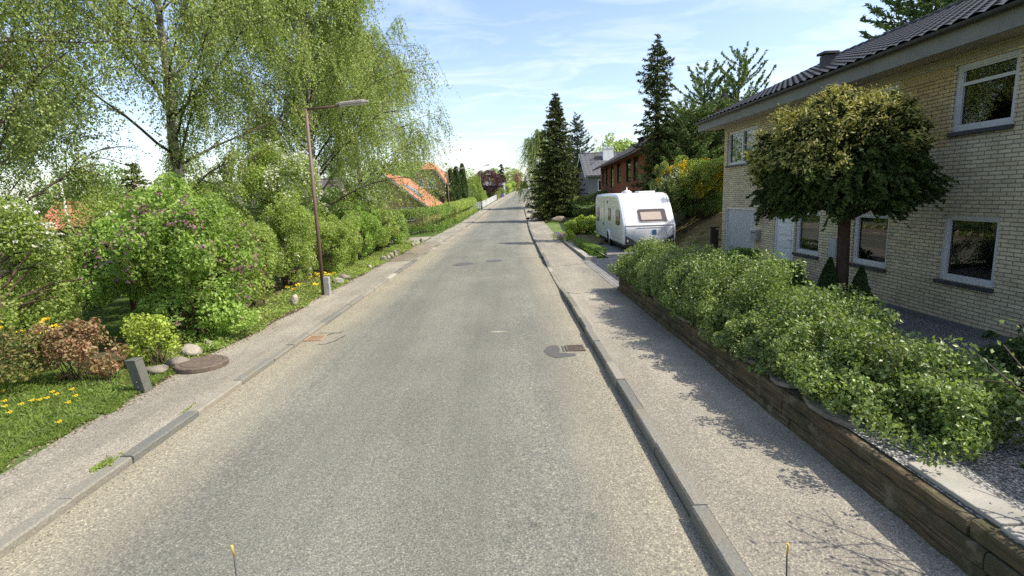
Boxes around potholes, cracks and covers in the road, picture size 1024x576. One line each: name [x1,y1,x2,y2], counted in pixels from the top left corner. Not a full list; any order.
manhole cover [174,355,229,374]
